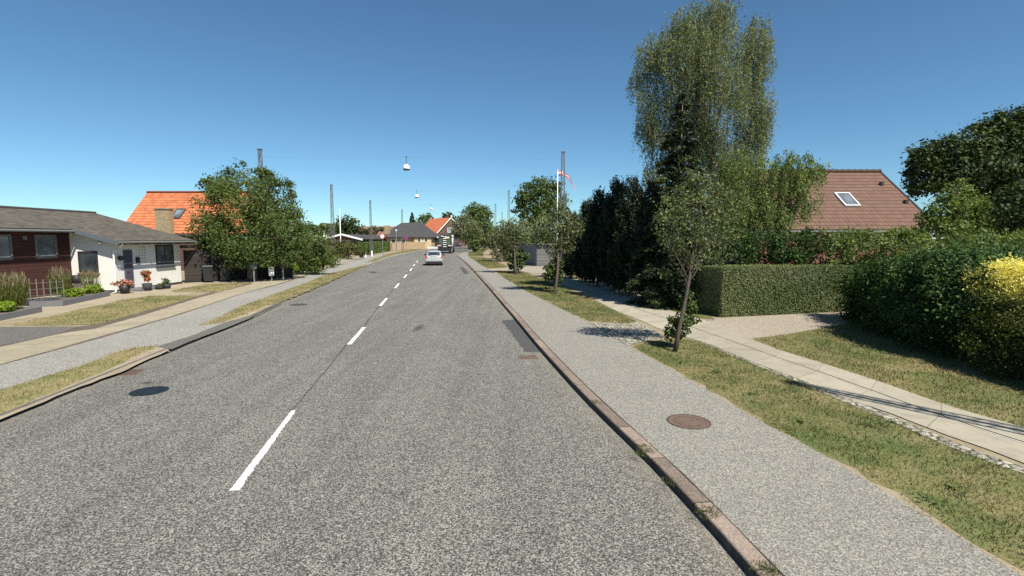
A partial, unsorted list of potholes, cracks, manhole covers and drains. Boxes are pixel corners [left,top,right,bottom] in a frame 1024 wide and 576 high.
manhole cover [129,386,169,396]
manhole cover [667,414,712,430]
